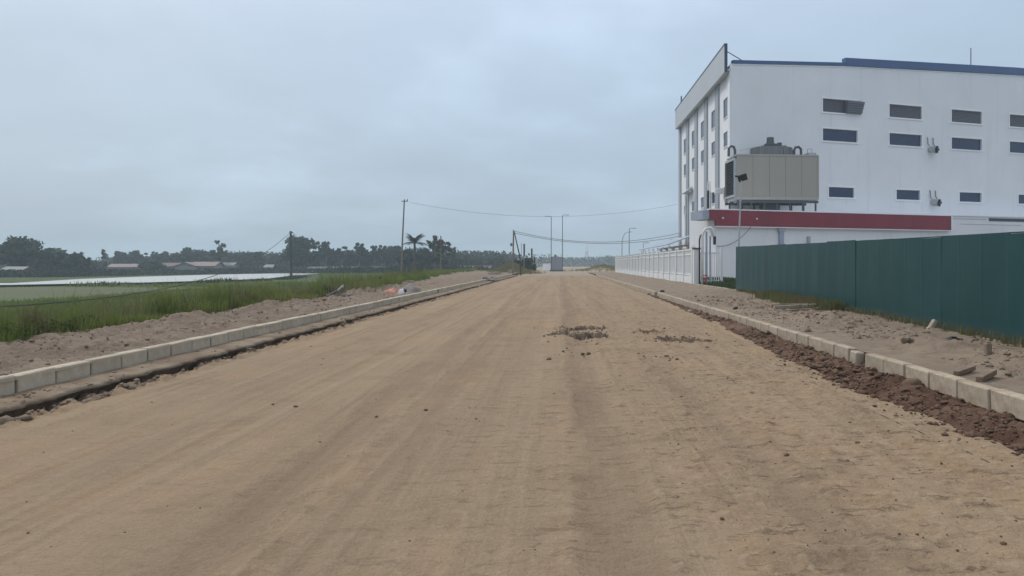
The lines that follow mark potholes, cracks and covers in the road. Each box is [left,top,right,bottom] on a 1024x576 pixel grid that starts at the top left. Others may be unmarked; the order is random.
pothole [535,324,620,343]
pothole [635,327,718,348]
